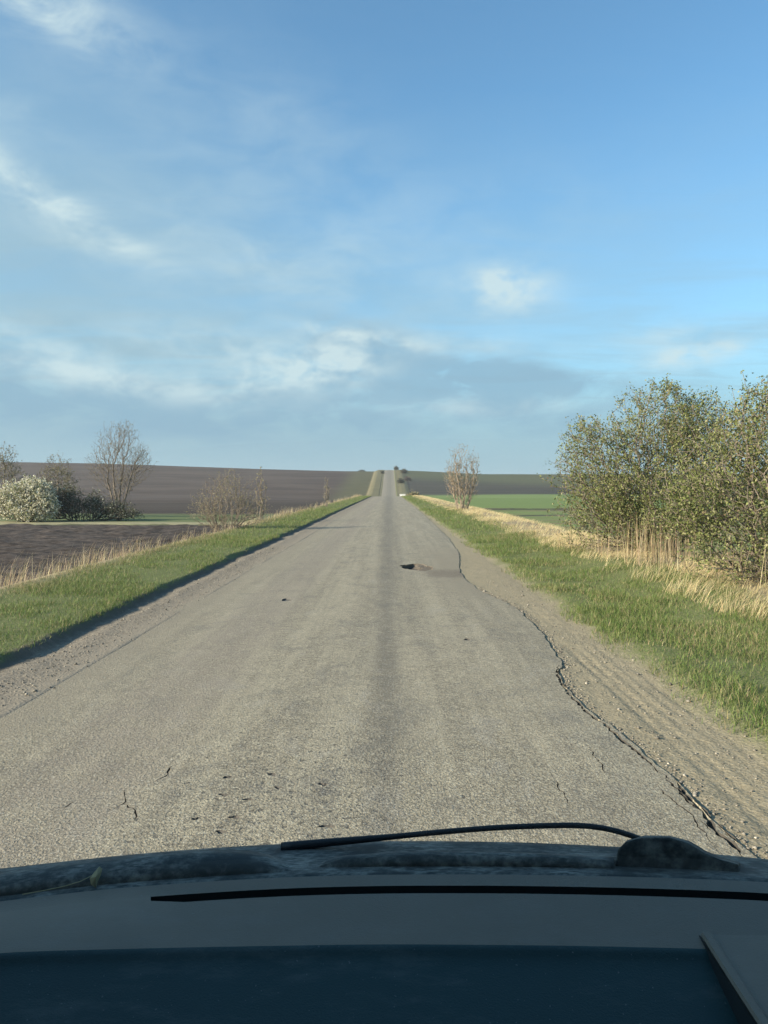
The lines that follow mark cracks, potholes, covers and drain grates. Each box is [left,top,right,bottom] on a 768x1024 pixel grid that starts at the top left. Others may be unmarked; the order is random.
crack [556,666,743,855]
